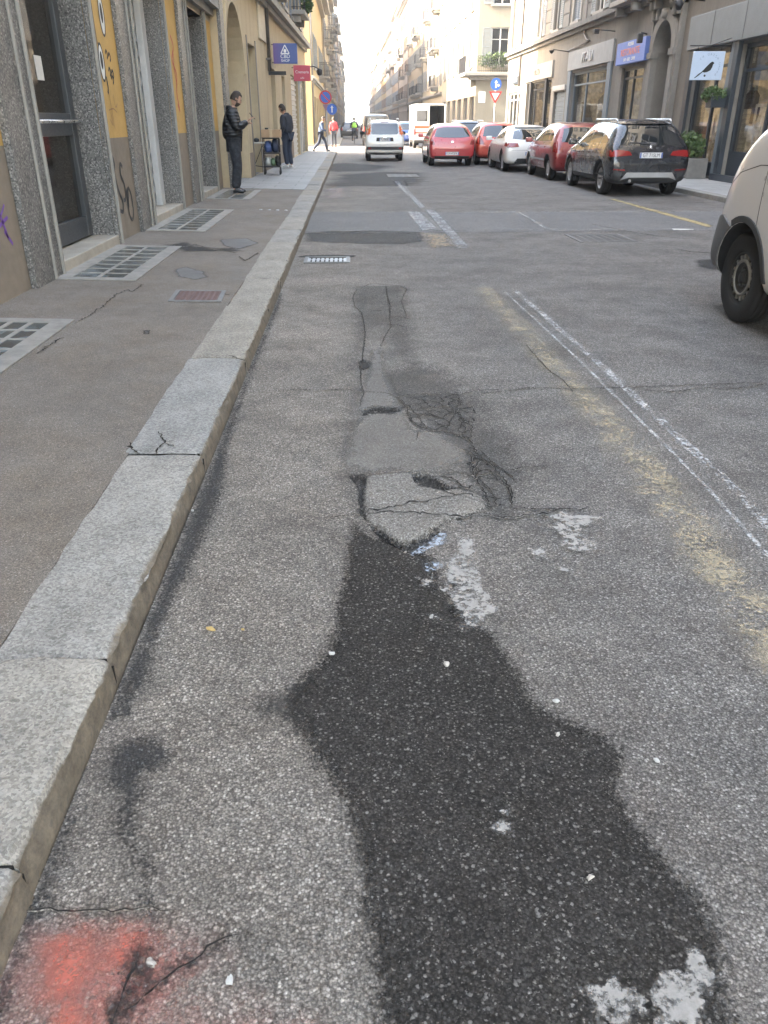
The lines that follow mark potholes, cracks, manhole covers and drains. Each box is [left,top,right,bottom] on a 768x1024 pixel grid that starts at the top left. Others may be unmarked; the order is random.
crack [113,933,248,1021]
pothole [349,474,367,518]
crack [27,906,174,914]
crack [324,345,767,519]
crack [37,284,142,354]
pothole [412,473,456,490]
pothole [372,528,440,553]
manhole cover [168,290,226,302]
